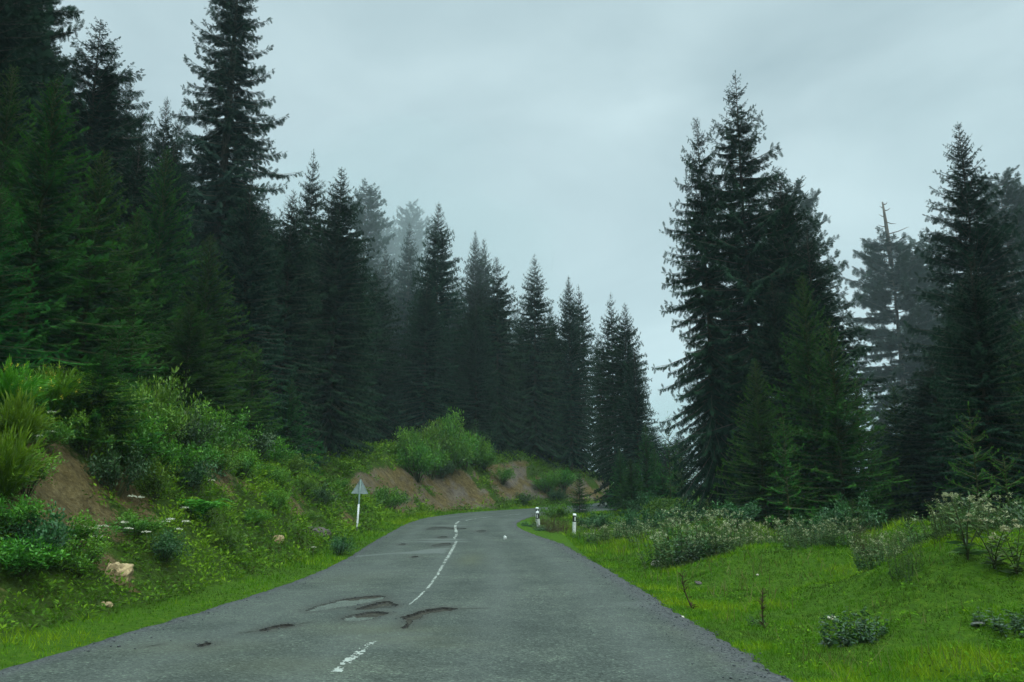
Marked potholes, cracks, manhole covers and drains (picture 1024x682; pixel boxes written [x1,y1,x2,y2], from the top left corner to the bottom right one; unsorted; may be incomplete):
pothole [305,595,386,612]
pothole [341,611,389,621]
pothole [356,601,398,610]
pothole [400,607,458,629]
